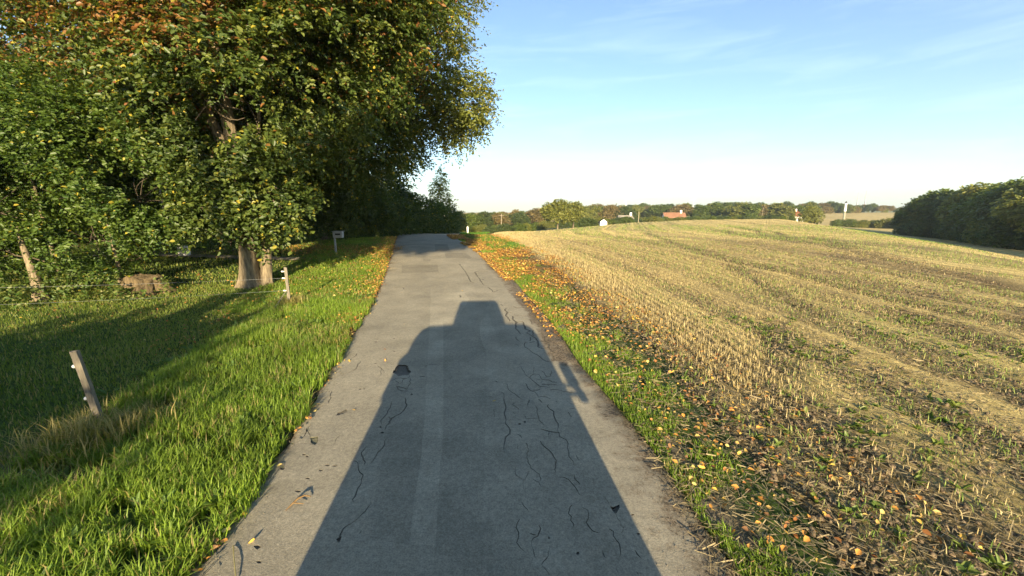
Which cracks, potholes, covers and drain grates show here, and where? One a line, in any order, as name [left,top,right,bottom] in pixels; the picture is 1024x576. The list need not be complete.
crack [459,264,640,574]
crack [339,354,432,537]
pothole [393,365,411,376]
